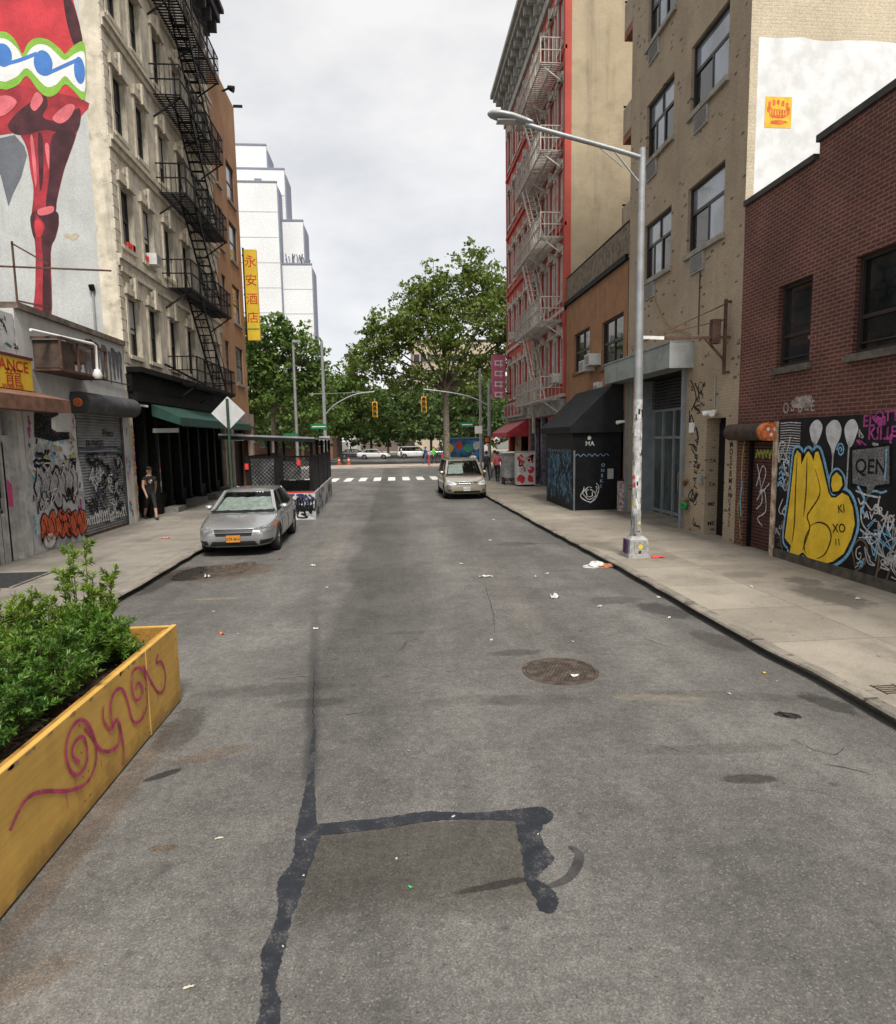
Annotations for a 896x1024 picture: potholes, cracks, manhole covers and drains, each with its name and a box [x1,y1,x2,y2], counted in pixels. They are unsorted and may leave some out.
crack [796,741,871,775]
drain grate [869,684,896,695]
manhole cover [522,658,599,685]
utility cover [0,571,52,588]
